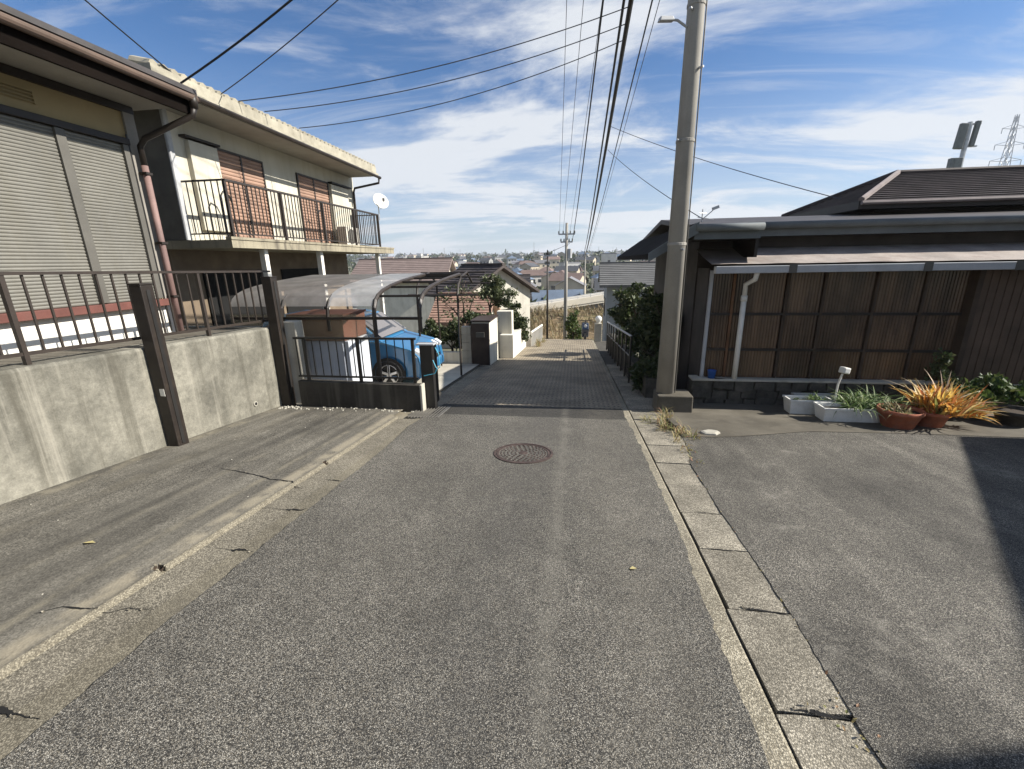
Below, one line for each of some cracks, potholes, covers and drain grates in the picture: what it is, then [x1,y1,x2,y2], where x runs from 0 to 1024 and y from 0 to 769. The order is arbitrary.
crack [219,468,300,488]
crack [0,706,39,719]
manhole cover [494,443,553,464]
crack [793,707,850,720]
